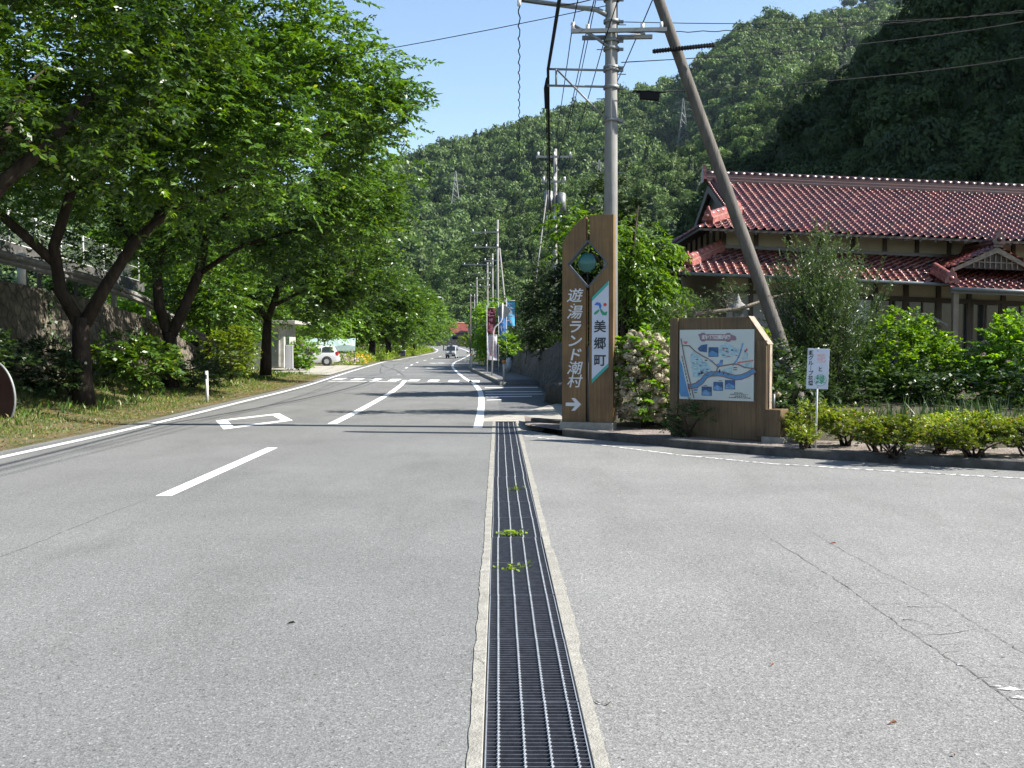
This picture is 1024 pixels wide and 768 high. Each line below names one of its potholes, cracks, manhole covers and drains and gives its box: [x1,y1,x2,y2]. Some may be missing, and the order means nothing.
drain grate [493,476,530,488]
drain grate [486,638,578,705]
crack [766,533,1024,711]
drain grate [490,561,554,595]
drain grate [493,487,533,502]
drain grate [494,467,528,478]
drain grate [493,501,537,518]
drain grate [484,701,593,768]
drain grate [492,517,541,538]
drain grate [491,537,546,562]
drain grate [494,451,523,459]
drain grate [494,459,525,467]
